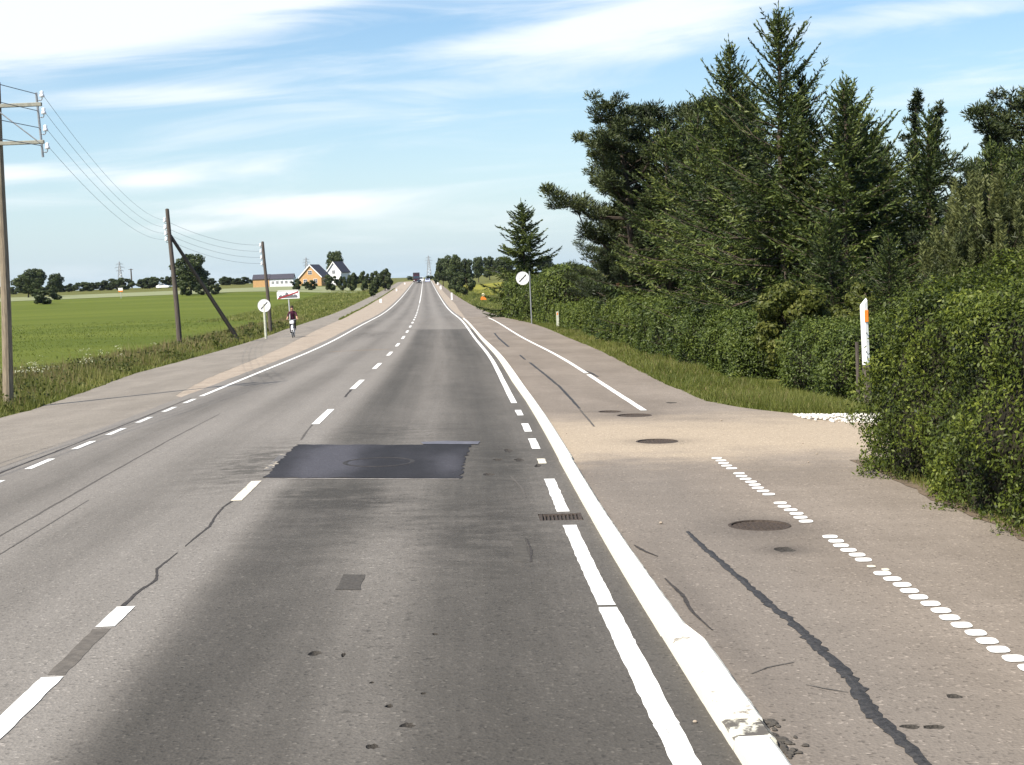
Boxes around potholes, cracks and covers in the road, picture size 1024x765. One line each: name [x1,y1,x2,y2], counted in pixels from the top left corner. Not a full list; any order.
manhole cover [728,520,791,531]
crack [664,578,713,630]
crack [121,501,233,606]
manhole cover [343,457,415,467]
drain grate [539,513,583,521]
